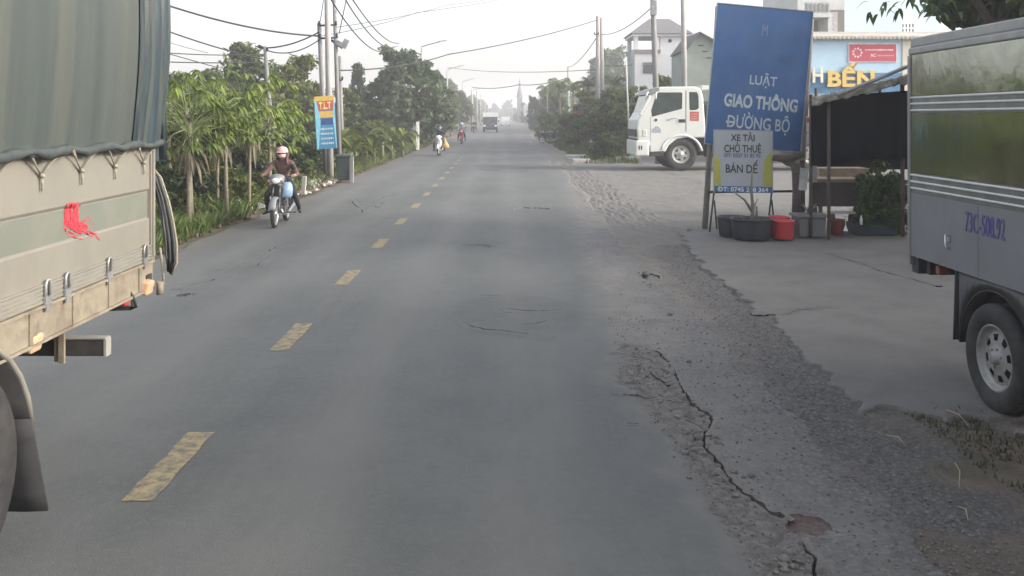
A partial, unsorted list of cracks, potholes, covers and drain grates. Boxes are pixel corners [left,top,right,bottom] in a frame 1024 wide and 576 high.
pothole [782,513,836,539]
crack [751,306,839,316]
crack [347,193,399,216]
crack [609,349,844,576]
crack [456,293,565,337]
